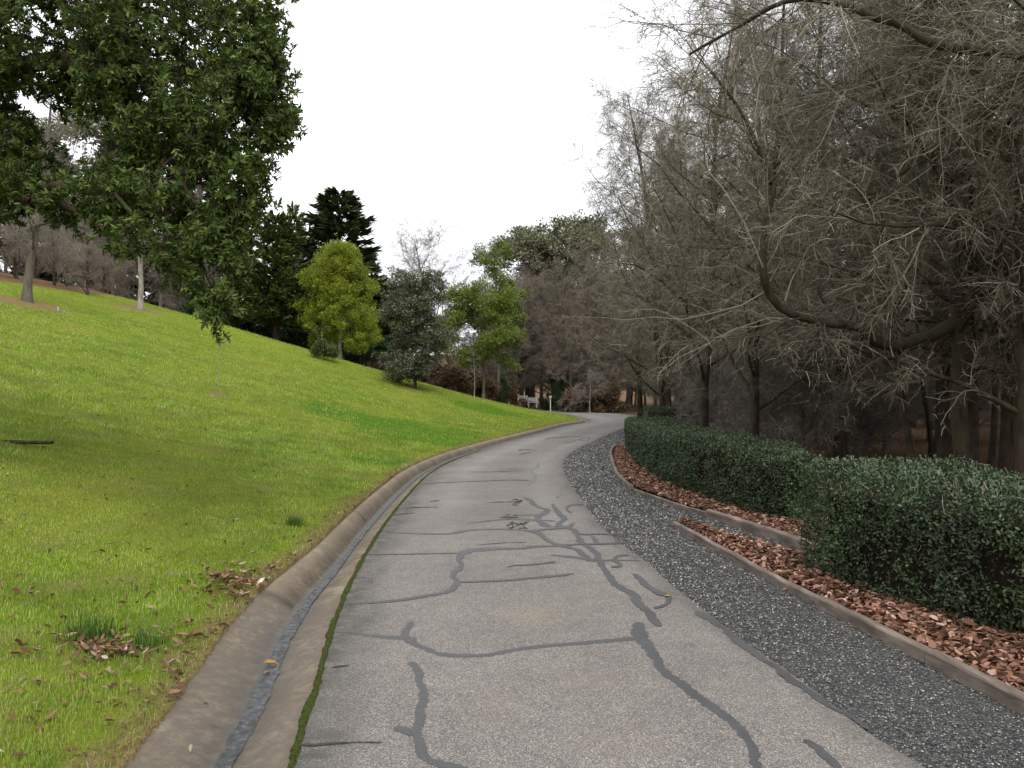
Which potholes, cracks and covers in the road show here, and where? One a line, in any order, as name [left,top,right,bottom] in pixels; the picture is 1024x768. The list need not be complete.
crack [422,436,591,545]
